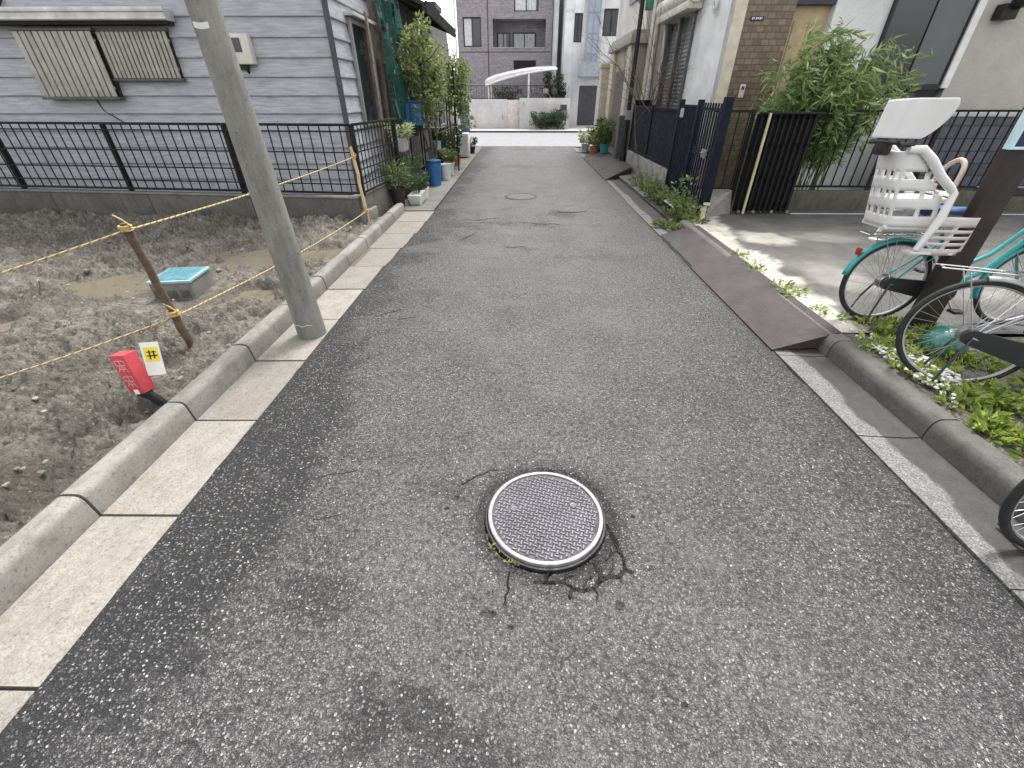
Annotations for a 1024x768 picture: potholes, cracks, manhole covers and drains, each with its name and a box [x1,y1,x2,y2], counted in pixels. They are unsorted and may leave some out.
crack [535,524,631,599]
manhole cover [485,472,606,576]
